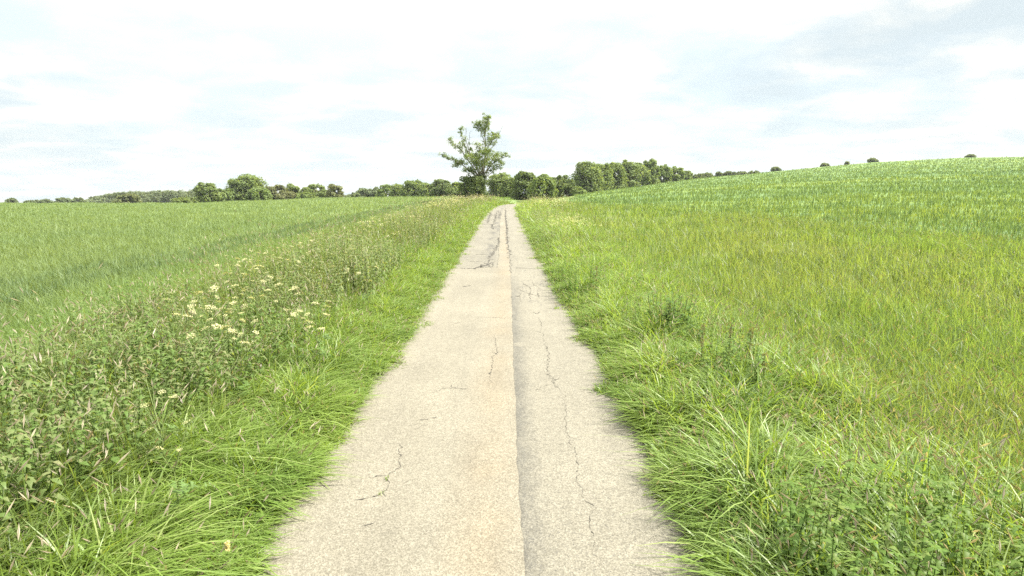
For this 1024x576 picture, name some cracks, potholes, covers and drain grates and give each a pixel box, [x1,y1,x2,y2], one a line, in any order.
crack [561,404,597,556]
crack [463,208,560,389]
